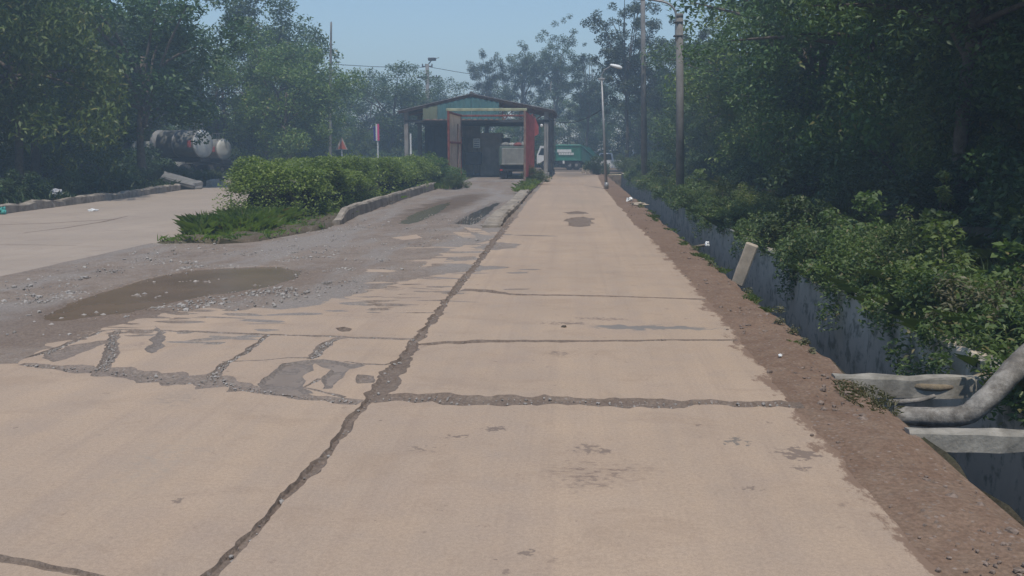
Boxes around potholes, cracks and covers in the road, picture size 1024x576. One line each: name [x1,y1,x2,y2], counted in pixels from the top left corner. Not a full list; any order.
pothole [448,201,502,225]
pothole [393,200,454,224]
crack [19,218,805,576]
pothole [36,265,307,322]
